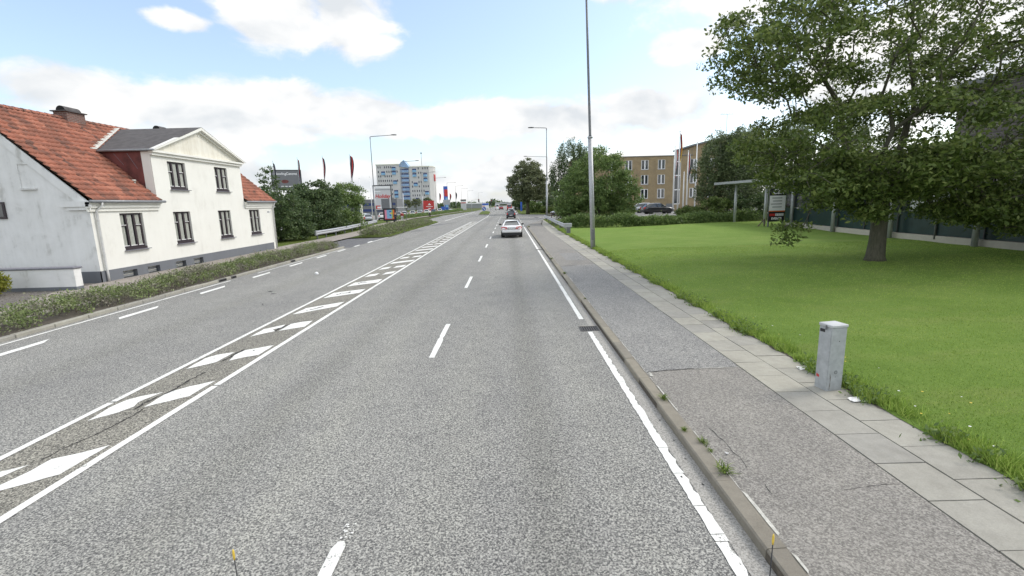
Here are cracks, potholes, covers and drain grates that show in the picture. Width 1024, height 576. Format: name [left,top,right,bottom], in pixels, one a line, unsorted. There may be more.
crack [41,372,205,460]
